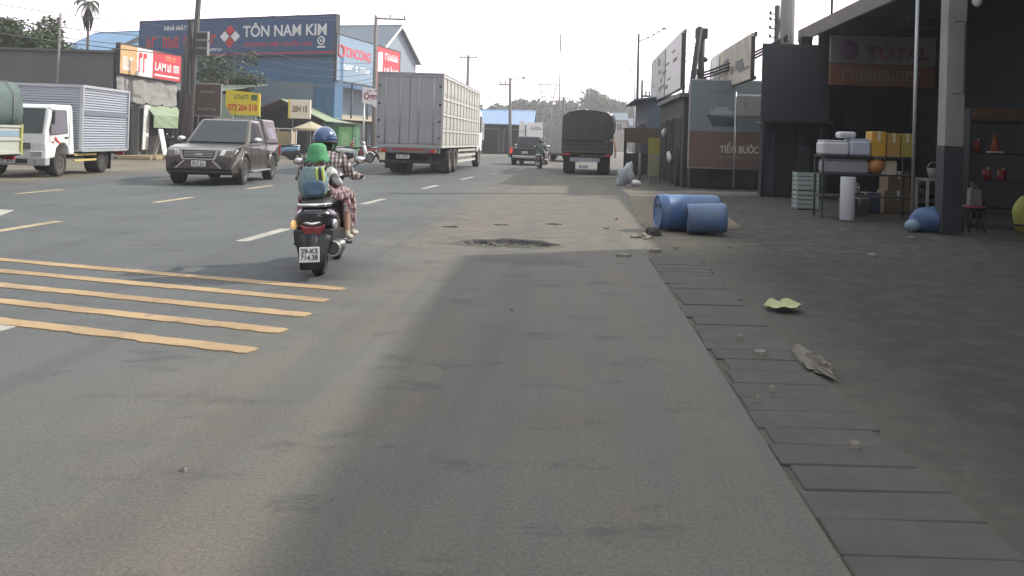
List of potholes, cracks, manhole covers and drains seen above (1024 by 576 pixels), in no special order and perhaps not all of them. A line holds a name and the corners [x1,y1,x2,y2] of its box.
pothole [447,238,564,248]
